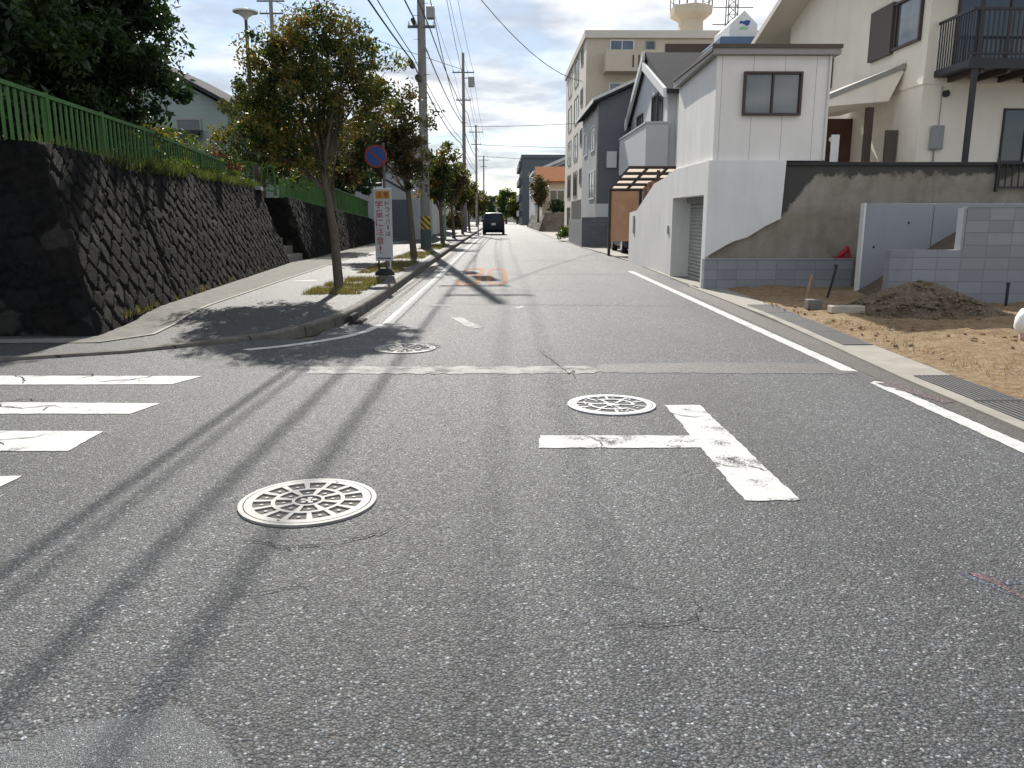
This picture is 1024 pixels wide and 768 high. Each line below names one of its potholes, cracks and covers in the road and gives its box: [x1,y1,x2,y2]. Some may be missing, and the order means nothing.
crack [229,522,405,549]
crack [614,596,765,634]
drain grate [748,304,873,345]
manhole cover [375,343,436,354]
drain grate [913,375,1023,401]
manhole cover [567,394,656,416]
drain grate [975,401,1024,421]
manhole cover [237,478,377,528]
